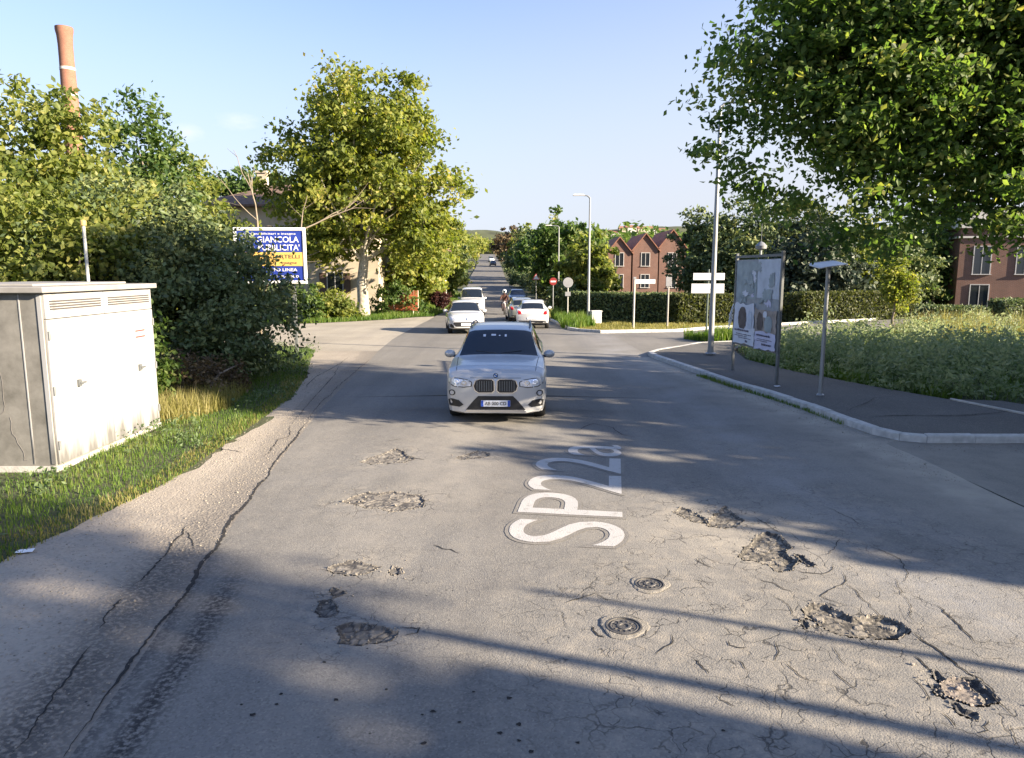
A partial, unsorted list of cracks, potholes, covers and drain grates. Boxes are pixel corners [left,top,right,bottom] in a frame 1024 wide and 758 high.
pothole [739,531,798,572]
crack [12,358,347,757]
pothole [931,669,946,683]
pothole [927,683,947,698]
pothole [336,622,399,646]
pothole [948,698,981,722]
crack [800,539,889,619]
pothole [961,677,1001,707]
pothole [794,553,817,567]
manhole cover [630,576,671,594]
crack [876,548,1022,745]
